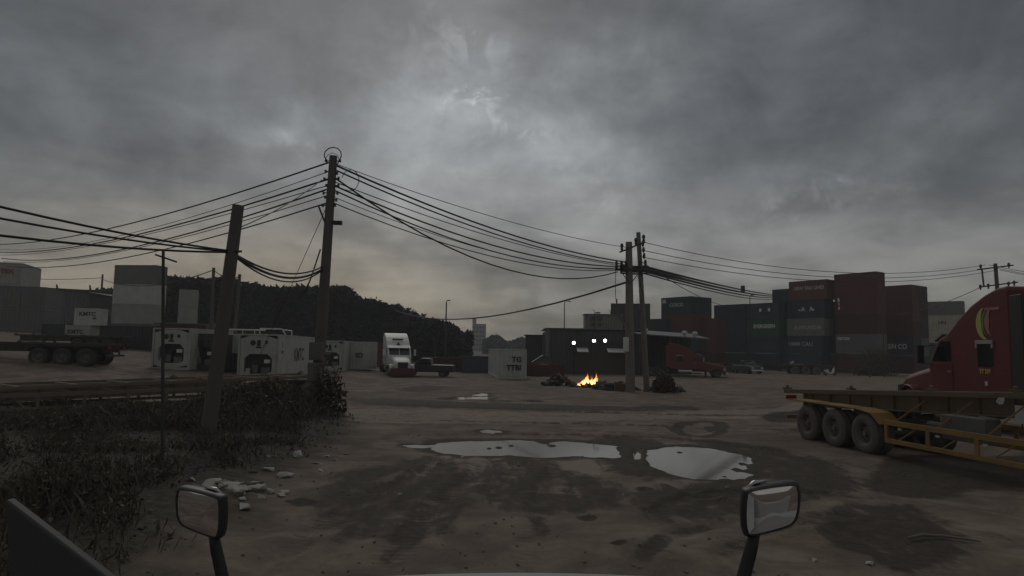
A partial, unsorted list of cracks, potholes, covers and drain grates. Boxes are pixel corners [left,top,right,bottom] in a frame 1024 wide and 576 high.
pothole [614,442,793,487]
pothole [399,436,639,464]
